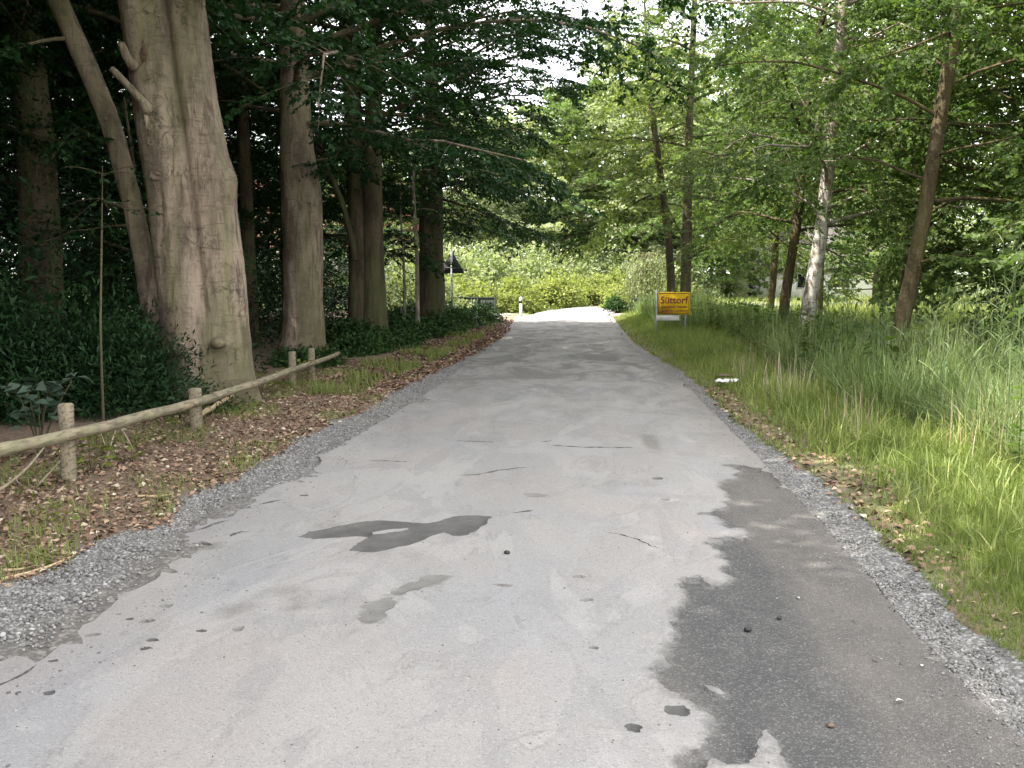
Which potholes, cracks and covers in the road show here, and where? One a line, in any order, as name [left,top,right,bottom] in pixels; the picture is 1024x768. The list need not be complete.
pothole [624,723,643,733]
pothole [299,515,492,552]
crack [542,440,633,448]
pothole [391,575,450,596]
pothole [358,597,398,624]
crack [0,666,35,685]
